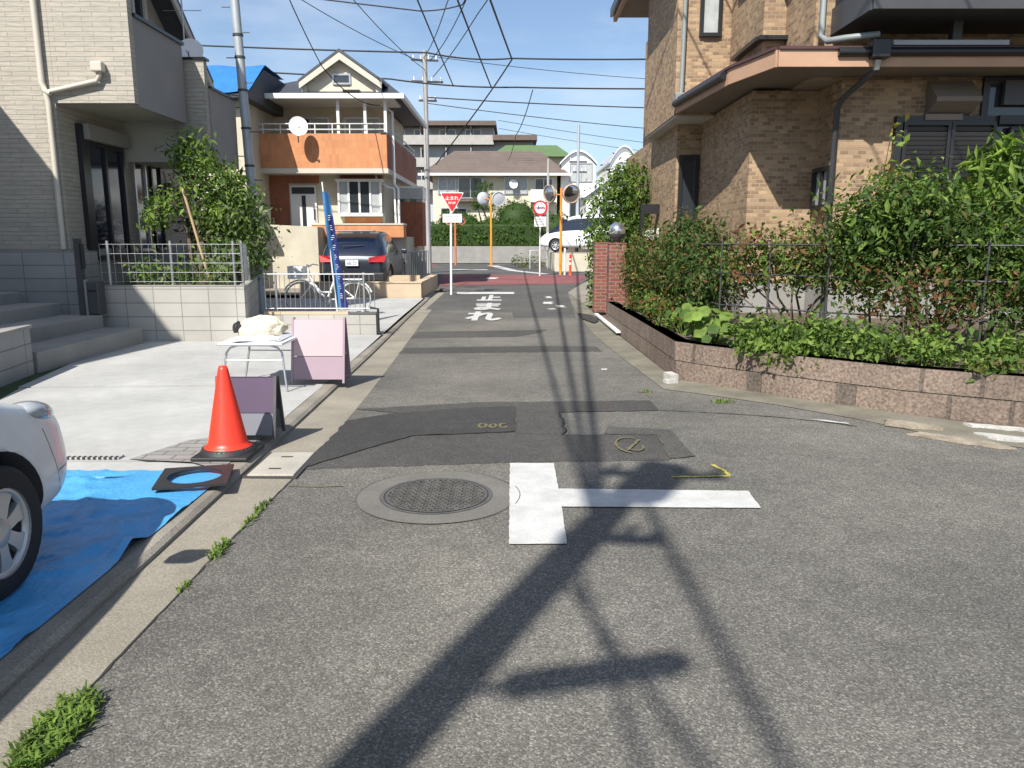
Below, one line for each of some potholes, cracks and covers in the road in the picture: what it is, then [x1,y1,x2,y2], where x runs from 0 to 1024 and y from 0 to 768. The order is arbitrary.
manhole cover [355,471,520,524]
crack [665,410,854,426]
